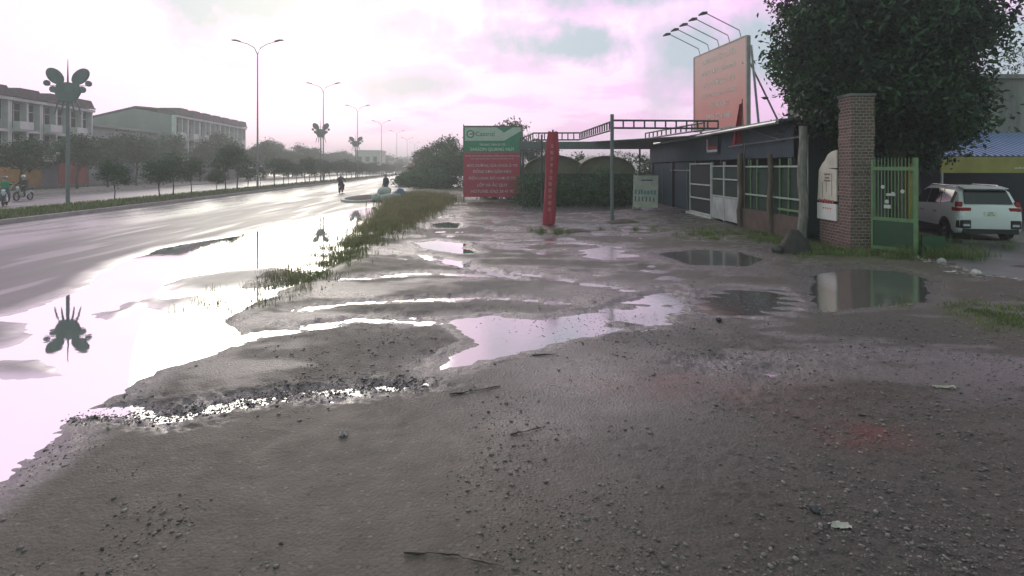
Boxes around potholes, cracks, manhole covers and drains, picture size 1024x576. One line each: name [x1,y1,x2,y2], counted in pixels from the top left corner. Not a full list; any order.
pothole [425,221,466,229]
pothole [681,283,822,321]
pothole [413,283,717,377]
